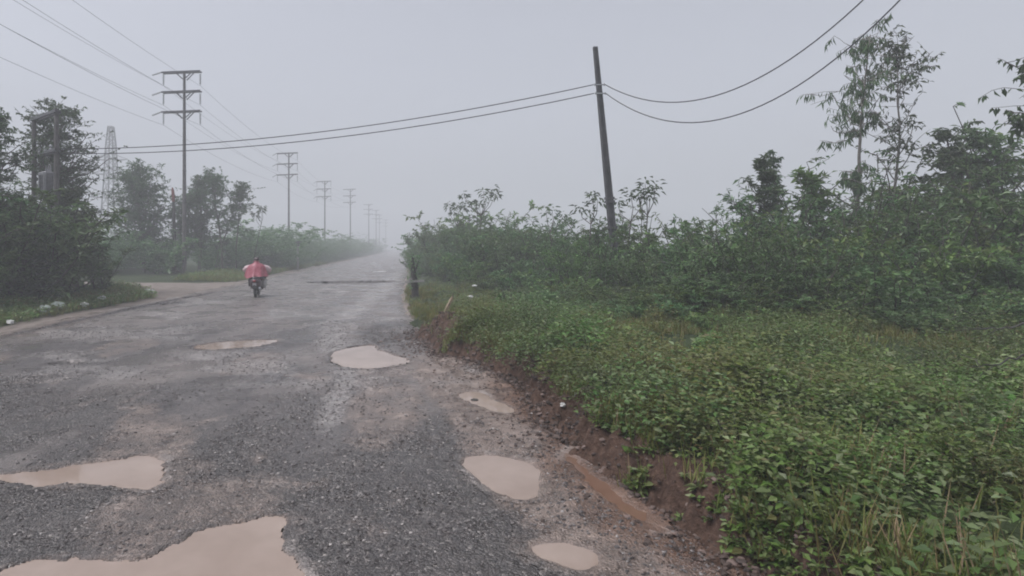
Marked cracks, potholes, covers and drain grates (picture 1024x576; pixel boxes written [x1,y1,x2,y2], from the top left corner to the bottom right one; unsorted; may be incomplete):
pothole [512,529,620,576]
pothole [450,450,555,504]
pothole [187,339,284,350]
pothole [0,507,322,576]
pothole [0,451,177,495]
pothole [322,344,416,369]
pothole [450,389,525,415]
